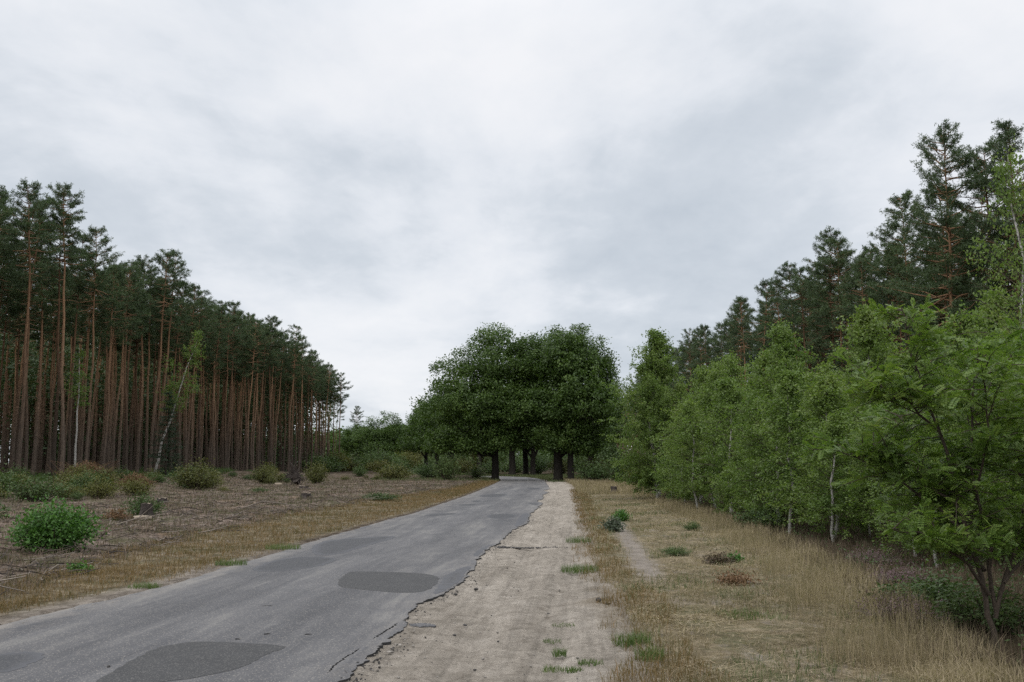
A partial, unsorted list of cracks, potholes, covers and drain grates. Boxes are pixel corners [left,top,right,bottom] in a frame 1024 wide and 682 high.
crack [329,623,397,672]
